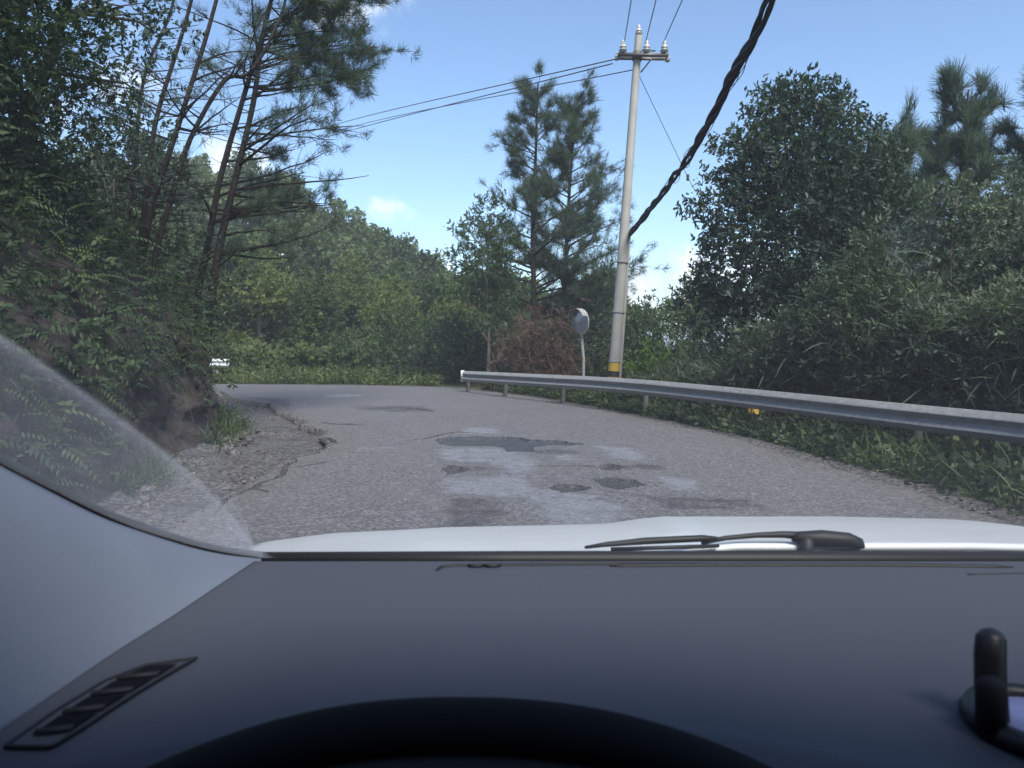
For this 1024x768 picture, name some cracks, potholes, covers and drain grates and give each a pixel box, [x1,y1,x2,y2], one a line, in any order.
pothole [595,477,645,490]
crack [212,445,335,515]
pothole [441,465,470,475]
pothole [548,484,592,492]
